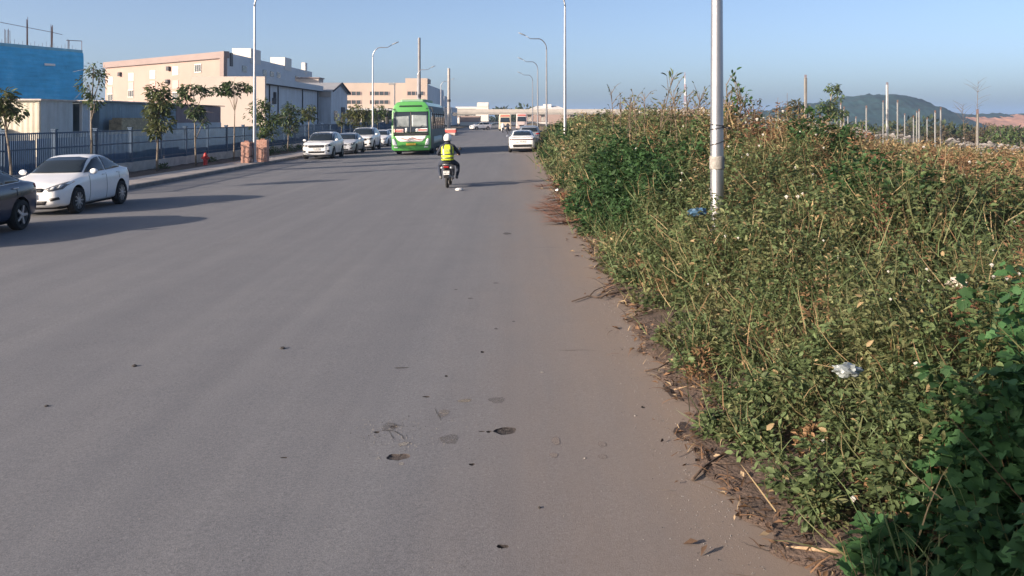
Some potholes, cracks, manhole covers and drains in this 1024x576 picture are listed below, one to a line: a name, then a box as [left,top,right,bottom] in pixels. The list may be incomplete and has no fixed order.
pothole [493,427,516,435]
